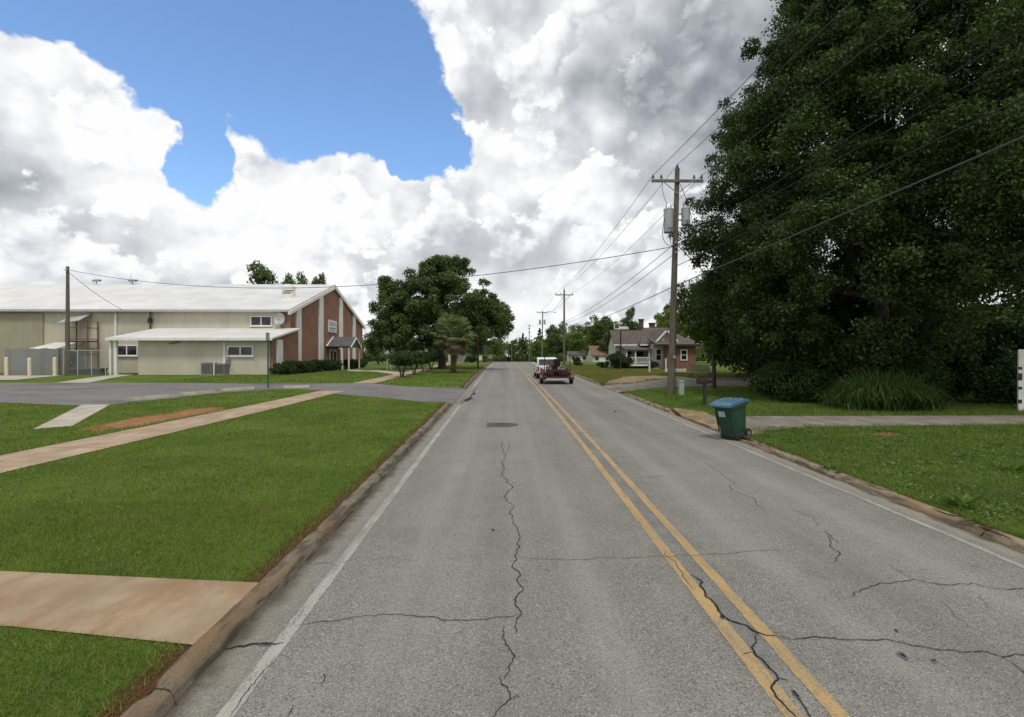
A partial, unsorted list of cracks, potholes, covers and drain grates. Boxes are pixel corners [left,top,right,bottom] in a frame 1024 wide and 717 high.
crack [296,442,1024,717]
